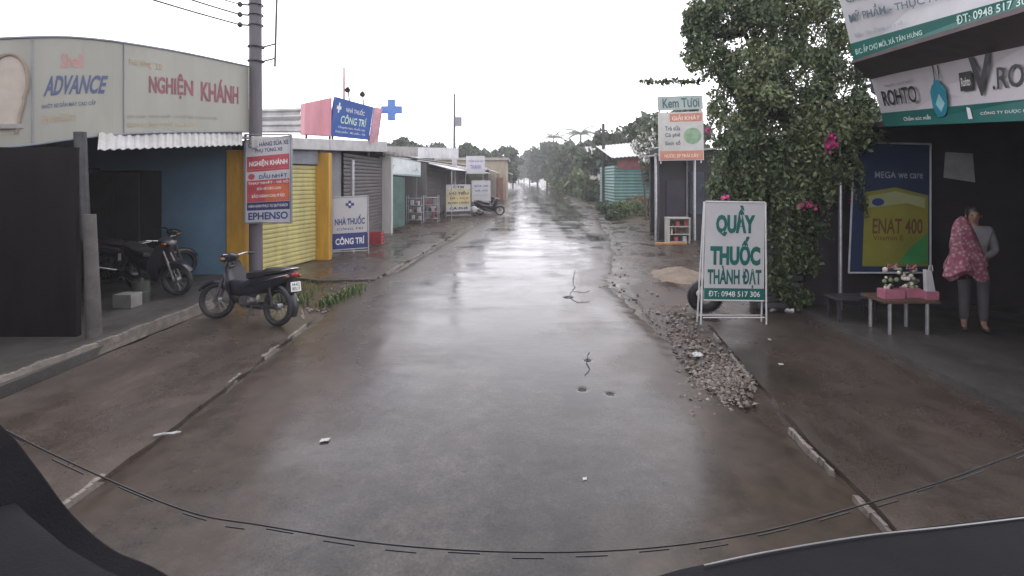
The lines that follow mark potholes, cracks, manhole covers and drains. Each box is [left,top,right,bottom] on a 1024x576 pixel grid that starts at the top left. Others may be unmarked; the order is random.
crack [570,275,649,317]
